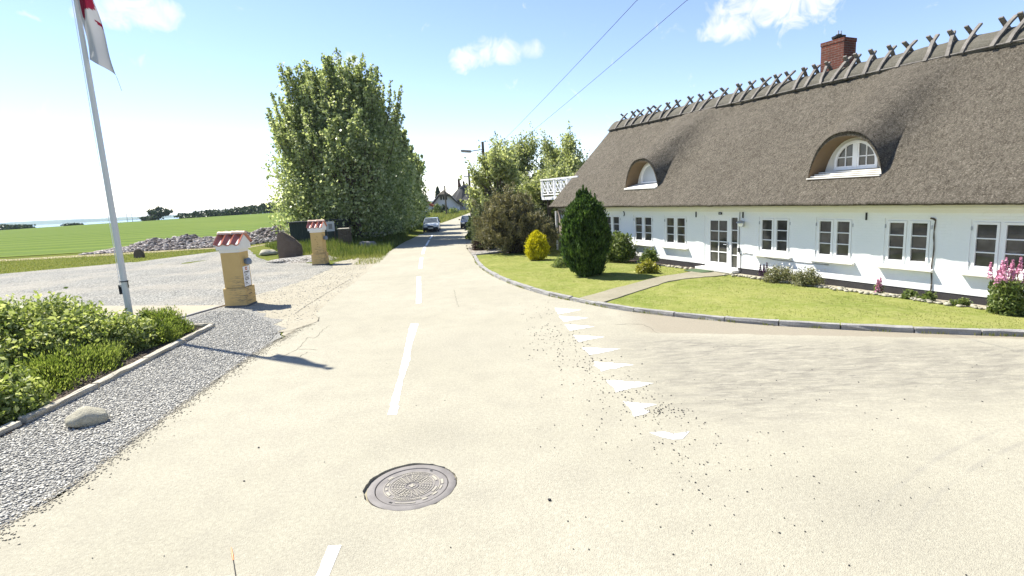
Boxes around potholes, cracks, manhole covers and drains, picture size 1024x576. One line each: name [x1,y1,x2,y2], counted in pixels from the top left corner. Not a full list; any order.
manhole cover [364,465,457,511]
crack [269,284,342,360]
